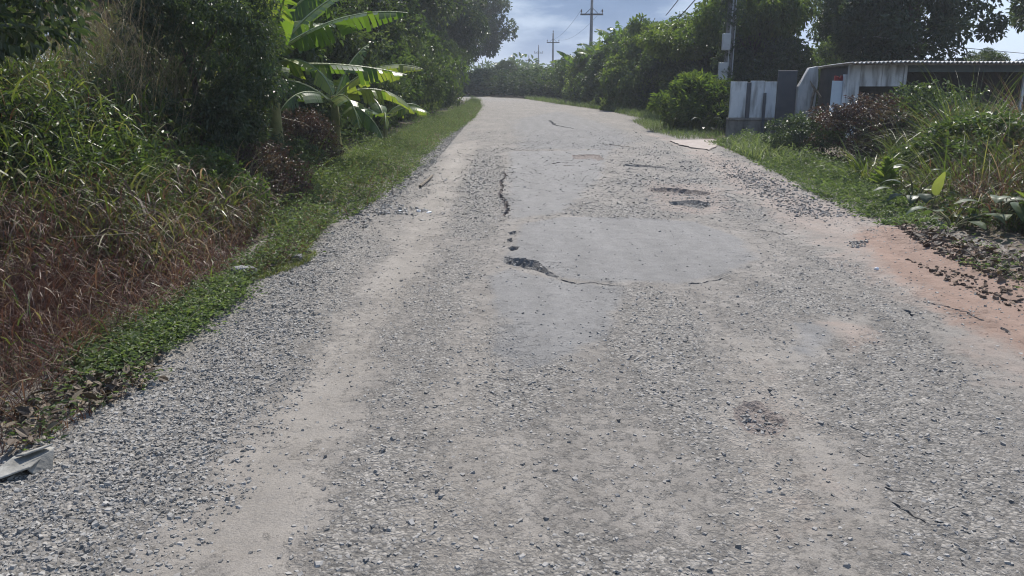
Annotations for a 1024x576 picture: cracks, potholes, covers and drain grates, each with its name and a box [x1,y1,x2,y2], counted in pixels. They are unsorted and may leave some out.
pothole [503,256,559,279]
pothole [733,400,788,436]
pothole [649,187,710,196]
crack [497,166,516,216]
pothole [668,200,711,209]
crack [884,487,926,523]
